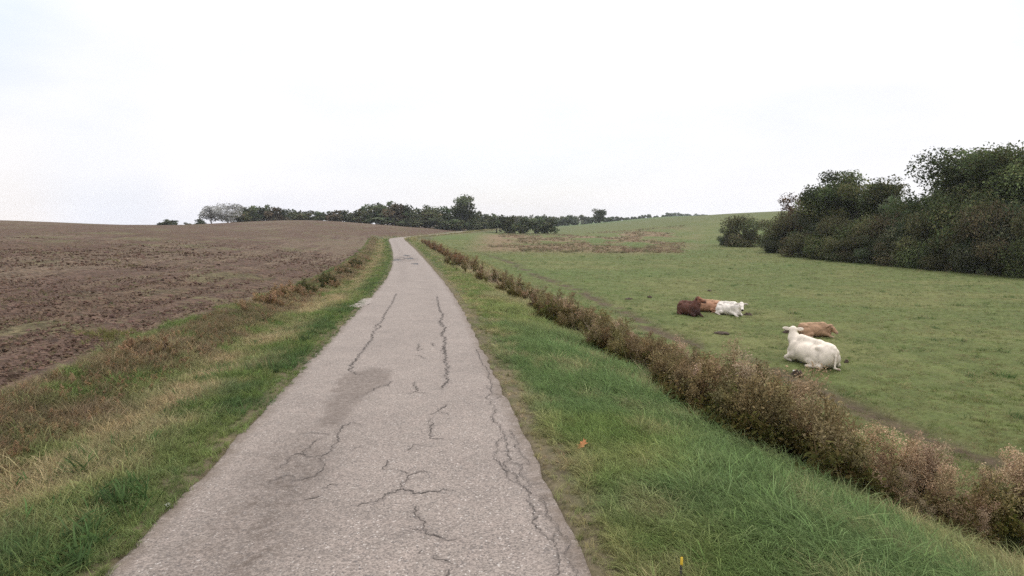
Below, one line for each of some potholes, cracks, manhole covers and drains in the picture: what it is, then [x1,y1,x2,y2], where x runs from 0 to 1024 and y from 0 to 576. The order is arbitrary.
crack [348,293,397,375]
crack [417,297,449,389]
crack [352,460,459,576]
crack [476,350,580,576]
crack [269,422,360,499]
